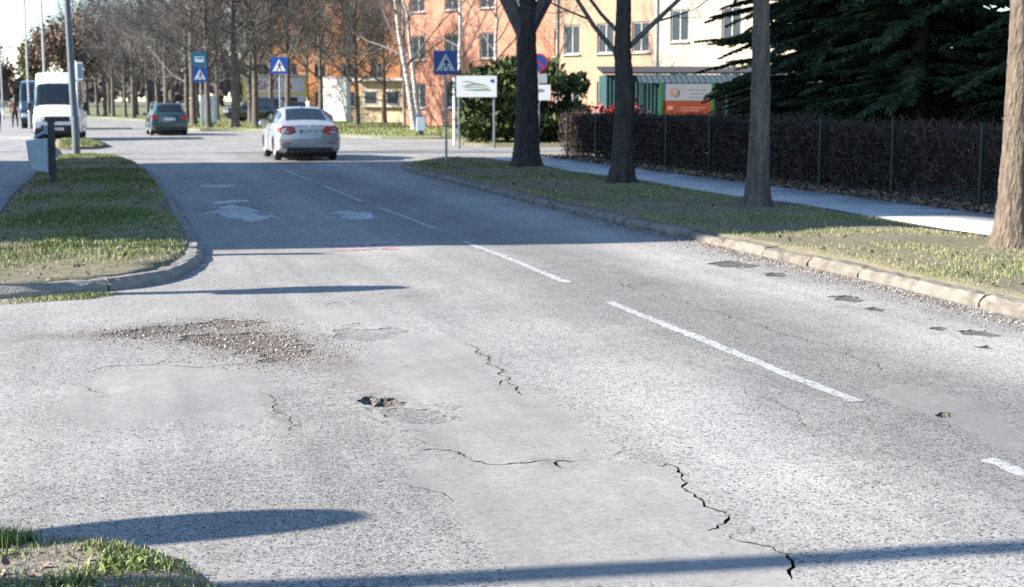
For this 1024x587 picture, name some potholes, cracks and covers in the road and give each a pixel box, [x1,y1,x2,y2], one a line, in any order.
crack [661,463,796,580]
crack [263,393,301,434]
pothole [357,396,408,408]
crack [367,417,587,469]
crack [465,343,522,396]
pothole [177,332,317,363]
crack [85,360,259,393]
